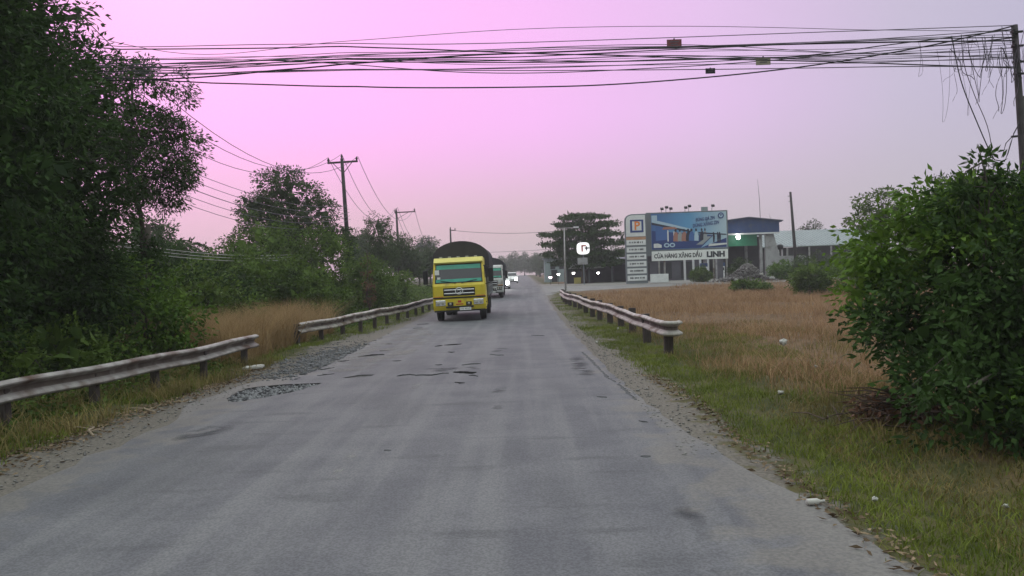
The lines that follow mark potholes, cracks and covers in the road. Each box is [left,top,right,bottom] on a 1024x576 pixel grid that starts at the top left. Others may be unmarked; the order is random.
pothole [227,383,321,402]
